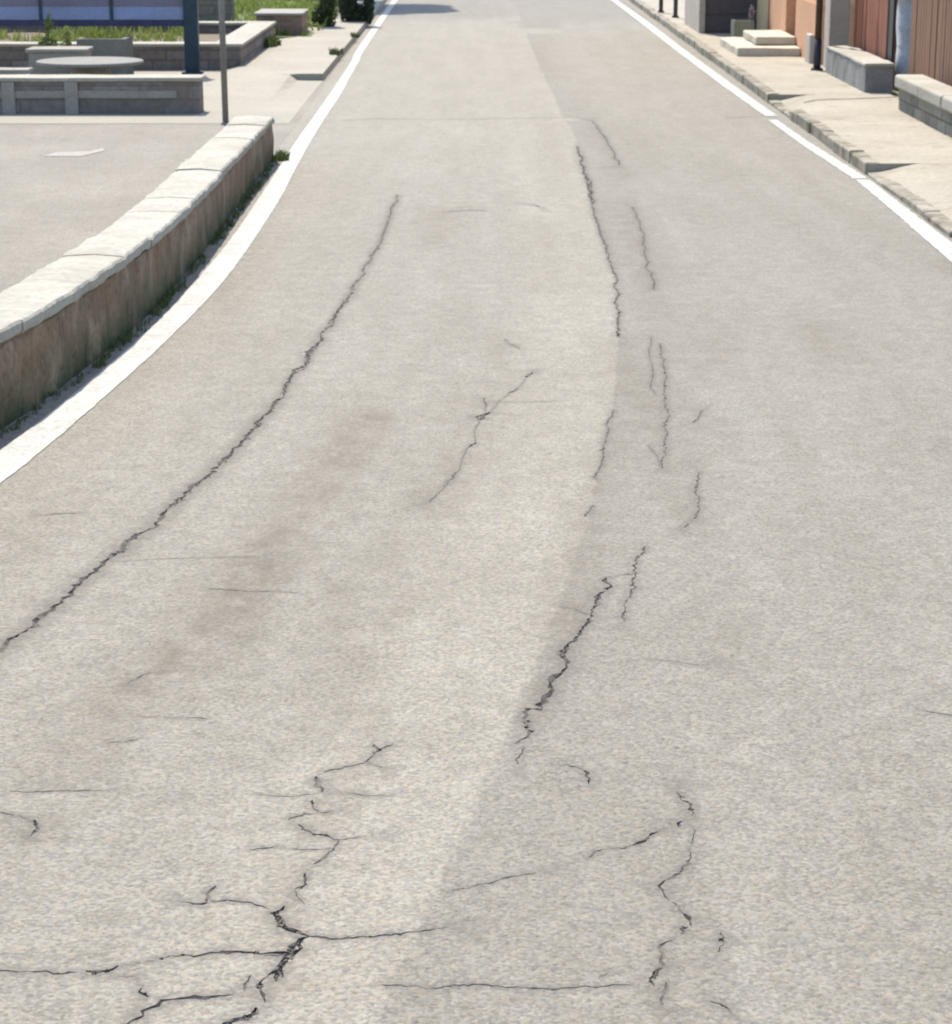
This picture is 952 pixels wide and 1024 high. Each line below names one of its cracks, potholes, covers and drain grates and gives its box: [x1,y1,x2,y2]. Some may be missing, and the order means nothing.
crack [515,547,646,765]
crack [0,195,399,652]
crack [0,745,443,1024]
crack [634,211,656,291]
crack [648,339,670,468]
crack [384,975,612,991]
crack [429,373,549,502]
crack [649,793,695,1005]
crack [584,412,614,517]
crack [576,121,621,337]
crack [590,832,657,857]
crack [684,476,700,528]
